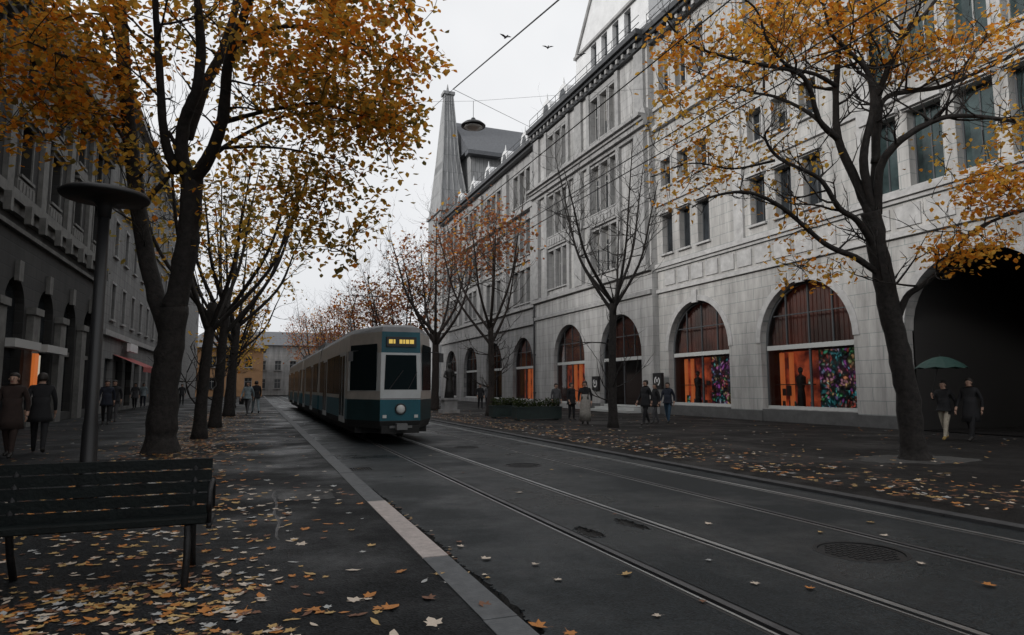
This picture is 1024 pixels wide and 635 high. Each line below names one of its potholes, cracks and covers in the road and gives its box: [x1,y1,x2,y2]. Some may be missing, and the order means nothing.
pothole [614,518,651,530]
pothole [573,525,606,539]
manhole cover [812,541,913,563]
crack [272,490,281,540]
